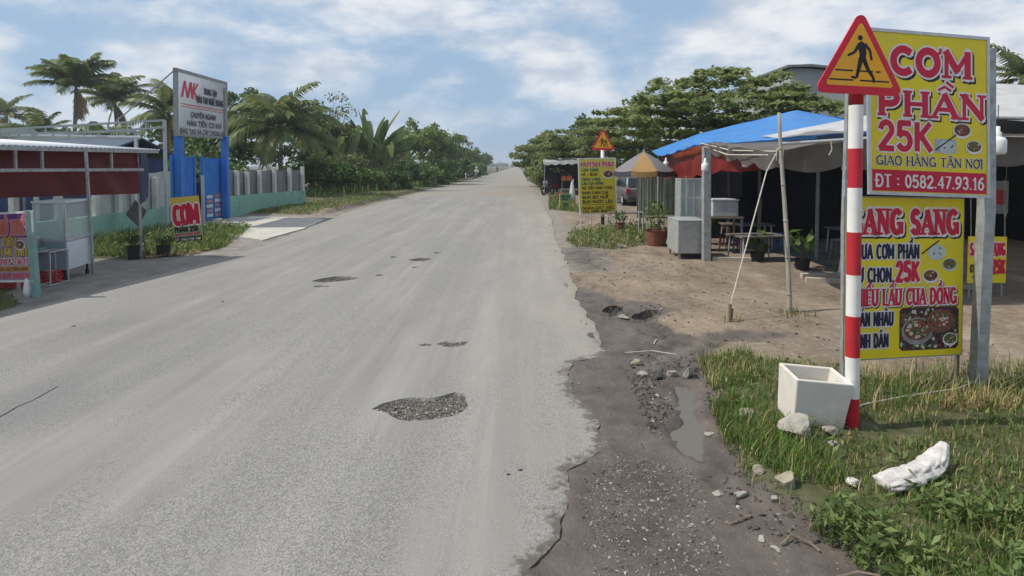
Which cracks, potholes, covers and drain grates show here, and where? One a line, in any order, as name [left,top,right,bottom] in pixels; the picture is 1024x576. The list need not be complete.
crack [0,386,59,417]
pothole [628,309,662,324]
pothole [598,305,623,317]
pothole [373,392,469,421]
